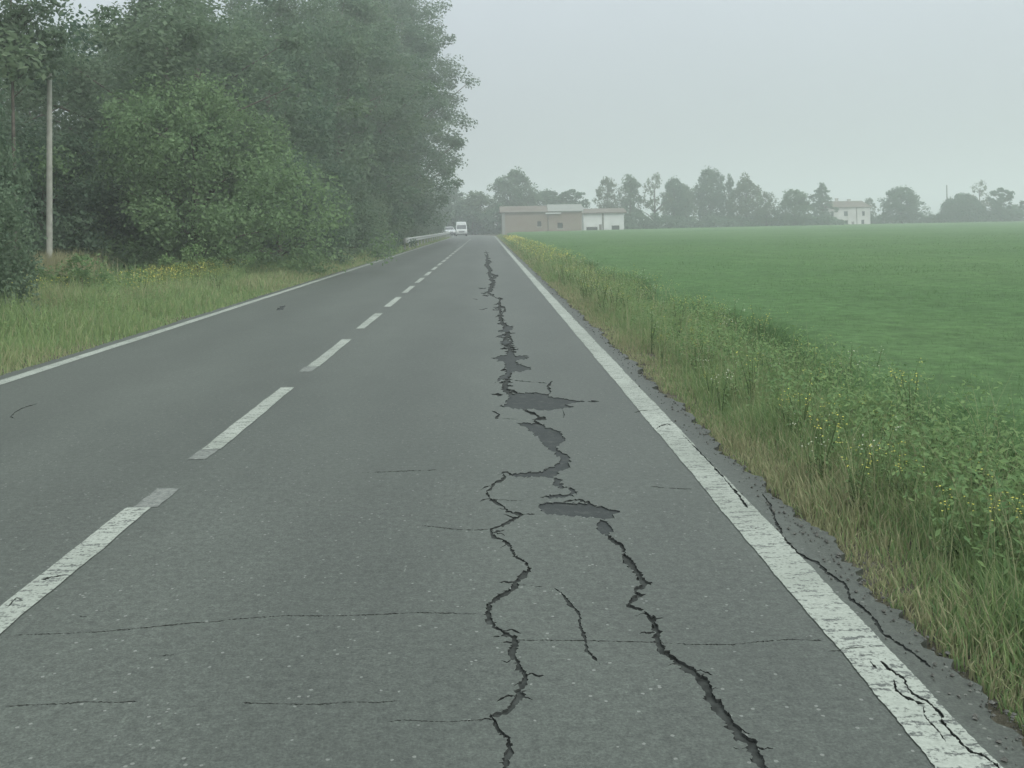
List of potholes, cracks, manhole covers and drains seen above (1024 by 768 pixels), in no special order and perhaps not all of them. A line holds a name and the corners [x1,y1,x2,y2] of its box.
pothole [493,350,531,382]
pothole [539,502,620,521]
pothole [518,422,566,453]
pothole [500,392,585,411]
crack [27,612,485,635]
crack [476,252,553,425]
crack [390,445,999,768]
